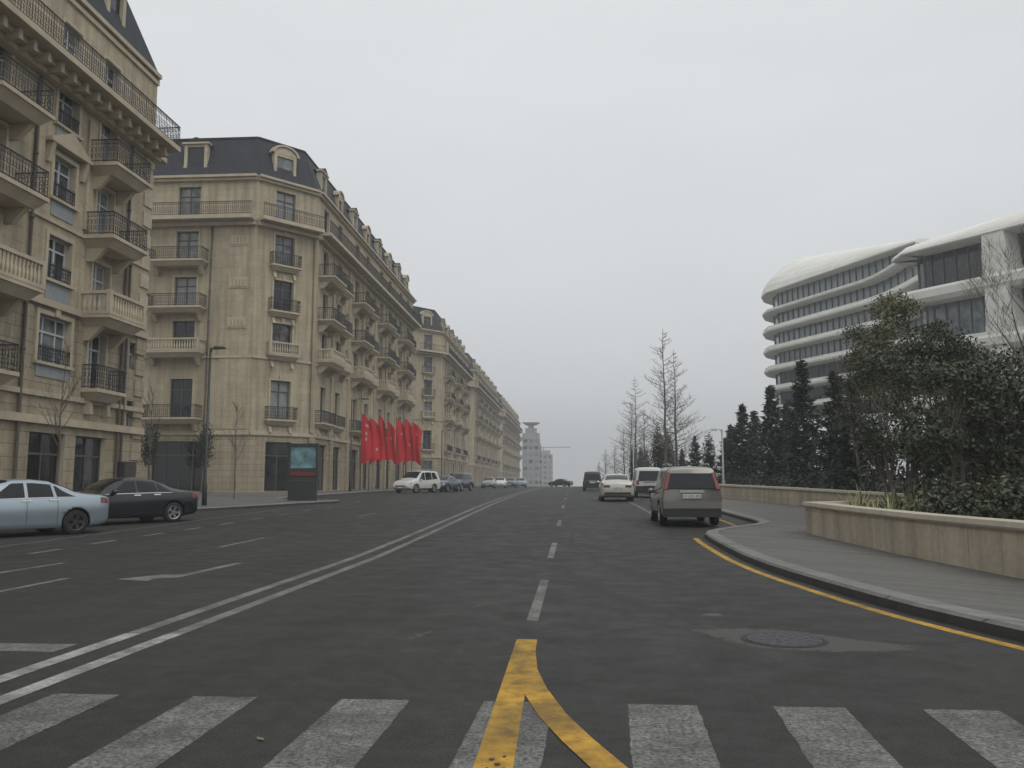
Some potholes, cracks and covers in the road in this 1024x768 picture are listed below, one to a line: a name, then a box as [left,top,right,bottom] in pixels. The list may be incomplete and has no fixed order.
manhole cover [740,632,829,648]
crack [570,531,588,554]
